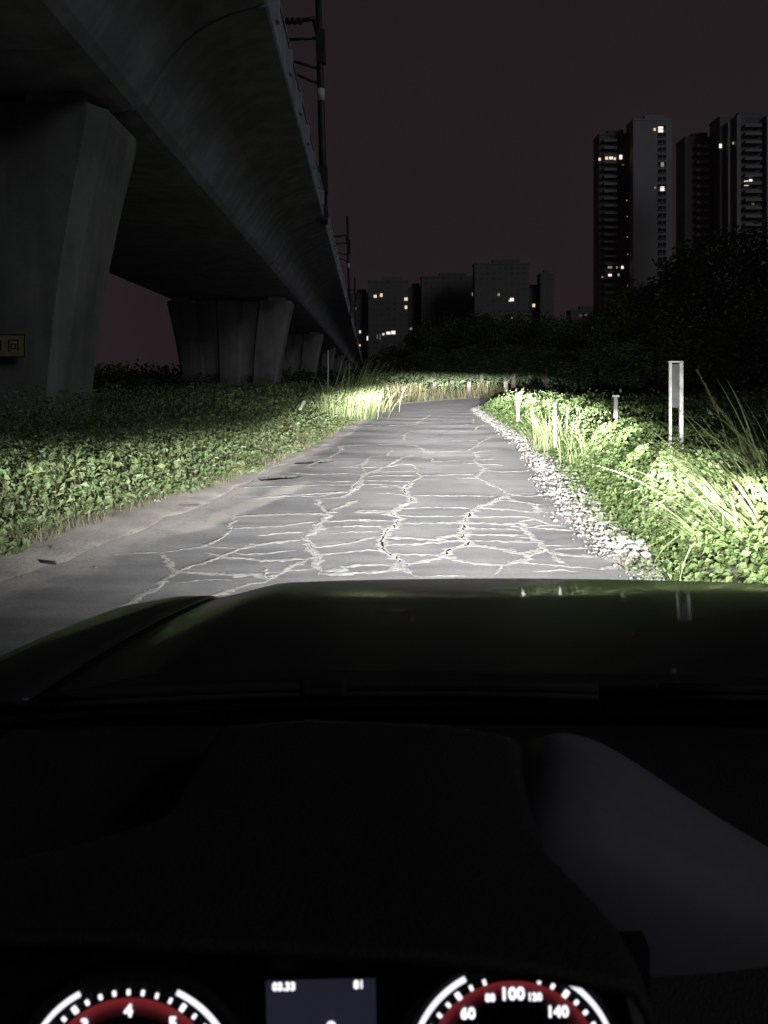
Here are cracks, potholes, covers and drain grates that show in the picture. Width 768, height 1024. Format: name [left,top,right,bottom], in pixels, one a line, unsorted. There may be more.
crack [116,415,627,607]
